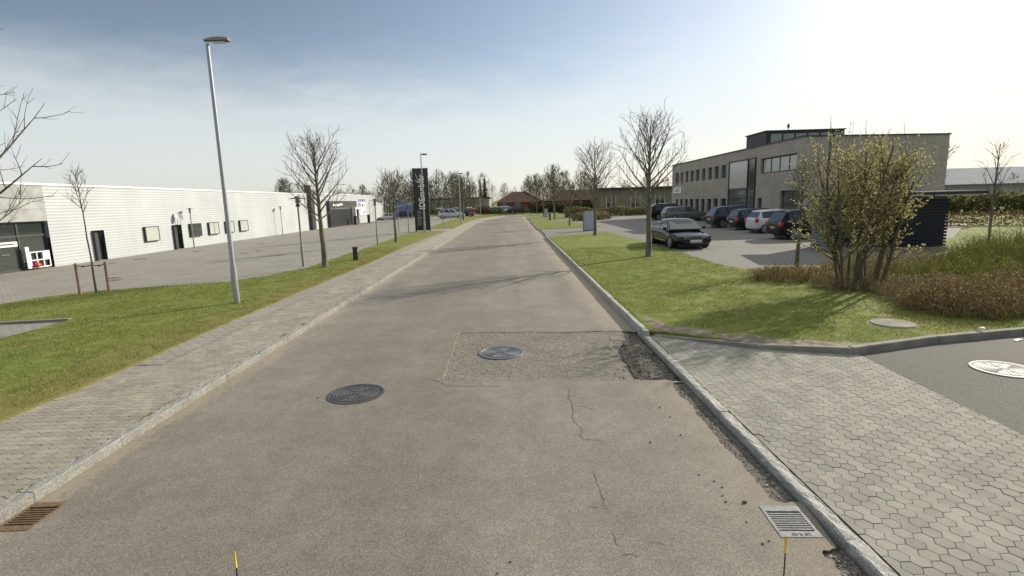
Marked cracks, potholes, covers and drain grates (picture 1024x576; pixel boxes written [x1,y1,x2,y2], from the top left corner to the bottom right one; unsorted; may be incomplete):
pothole [621,333,683,383]
drain grate [759,506,823,538]
manhole cover [968,360,1024,379]
manhole cover [479,346,523,360]
drain grate [0,501,69,532]
manhole cover [326,384,385,405]
